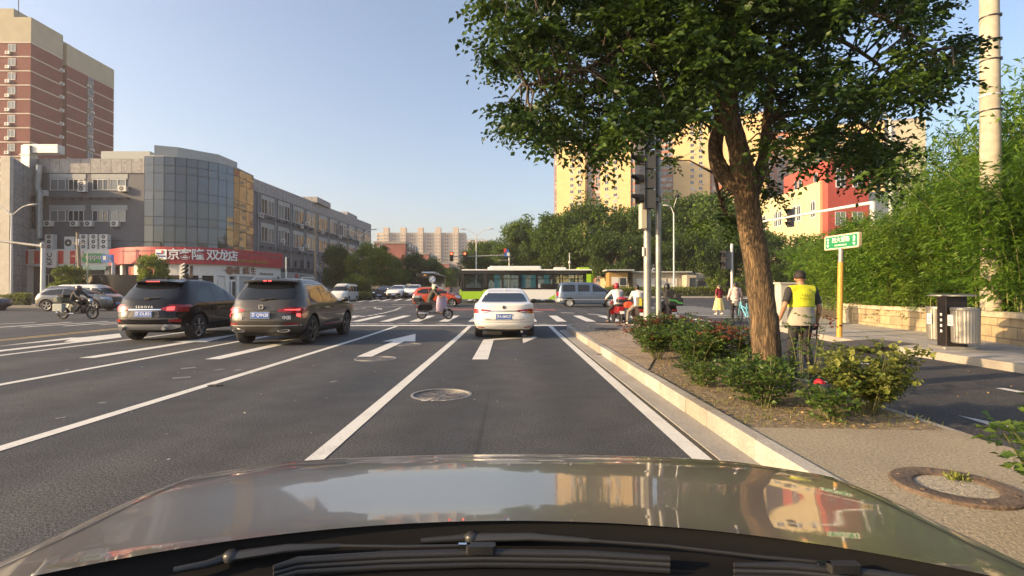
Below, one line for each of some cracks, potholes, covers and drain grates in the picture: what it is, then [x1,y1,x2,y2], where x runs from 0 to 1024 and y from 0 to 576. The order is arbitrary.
manhole cover [888,467,1024,511]
manhole cover [411,388,472,401]
